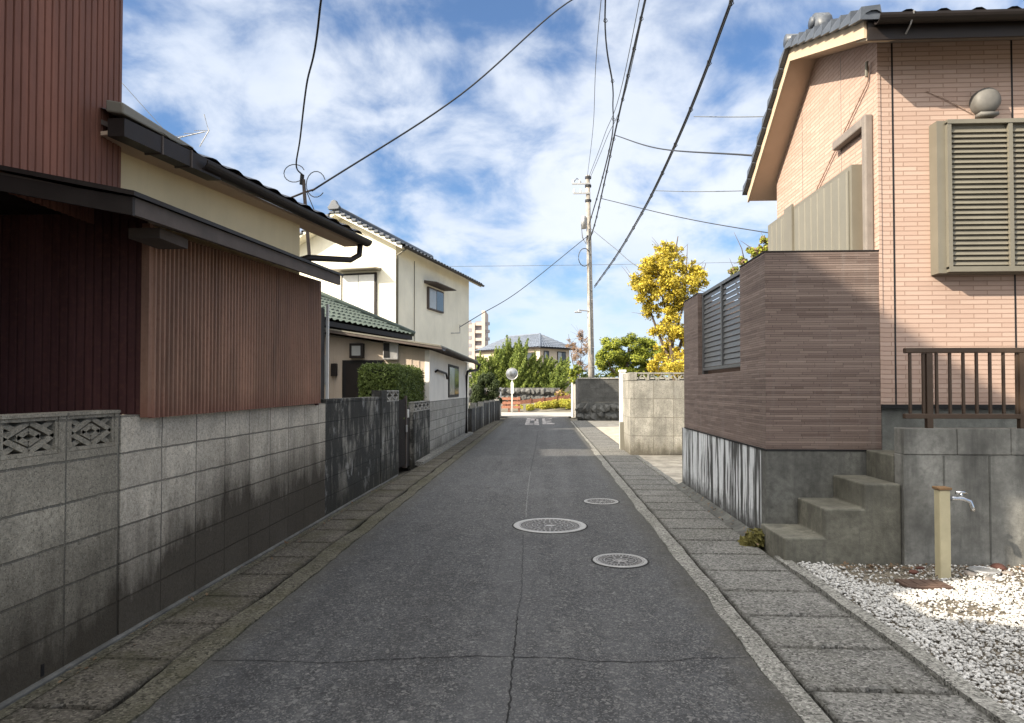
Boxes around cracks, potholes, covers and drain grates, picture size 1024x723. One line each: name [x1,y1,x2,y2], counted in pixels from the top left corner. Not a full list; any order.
manhole cover [512,518,588,534]
manhole cover [591,553,650,568]
